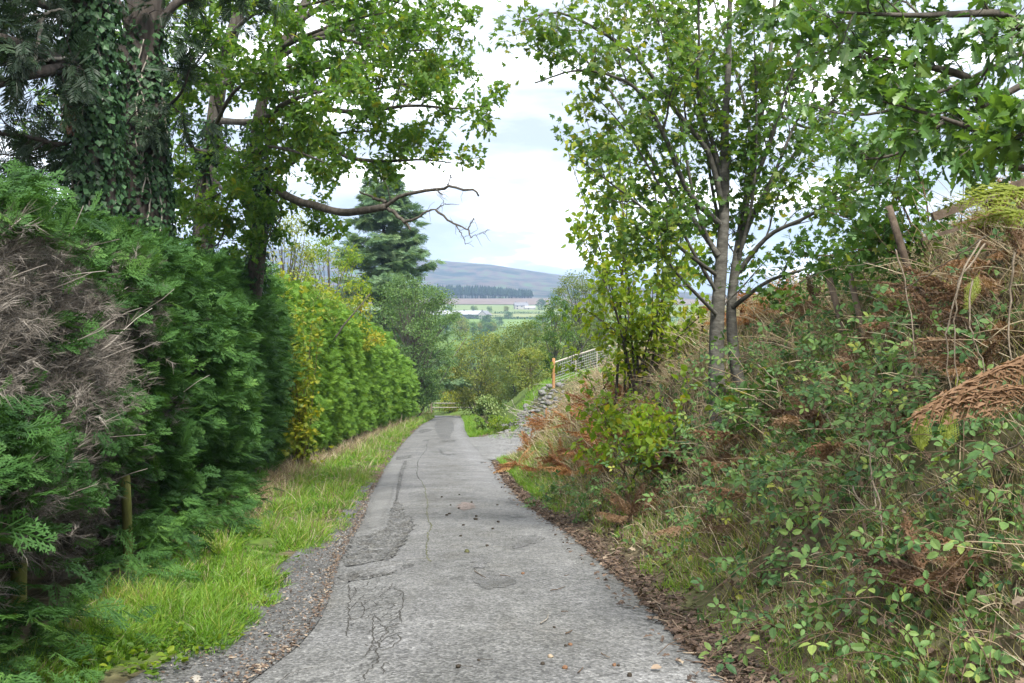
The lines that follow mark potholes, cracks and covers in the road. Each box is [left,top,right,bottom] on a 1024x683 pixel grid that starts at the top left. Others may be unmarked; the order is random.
crack [333,558,430,680]
crack [402,440,429,526]
